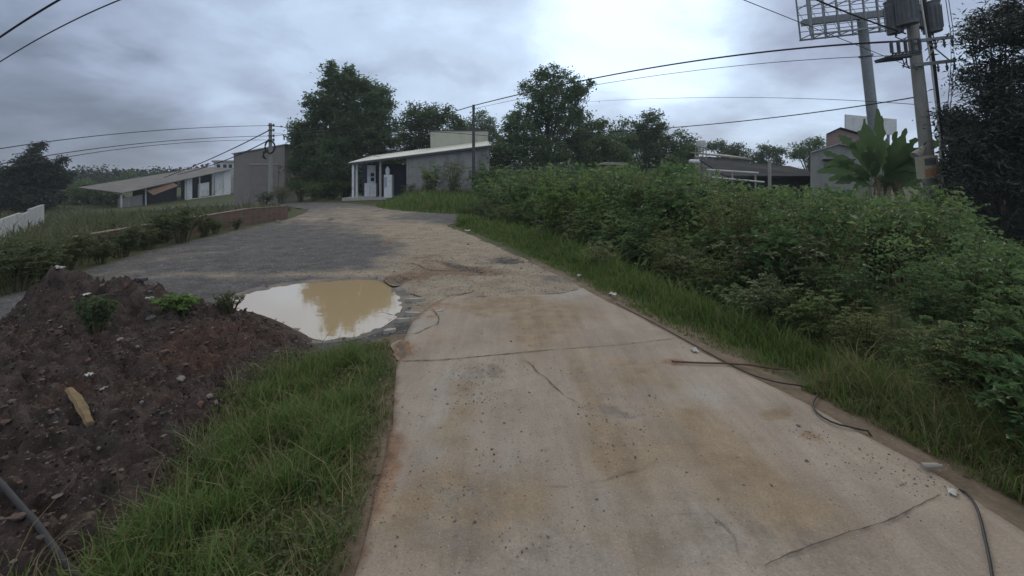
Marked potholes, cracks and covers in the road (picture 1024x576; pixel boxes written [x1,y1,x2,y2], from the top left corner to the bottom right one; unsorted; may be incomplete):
crack [384,292,487,338]
pothole [230,277,413,343]
crack [765,494,941,565]
